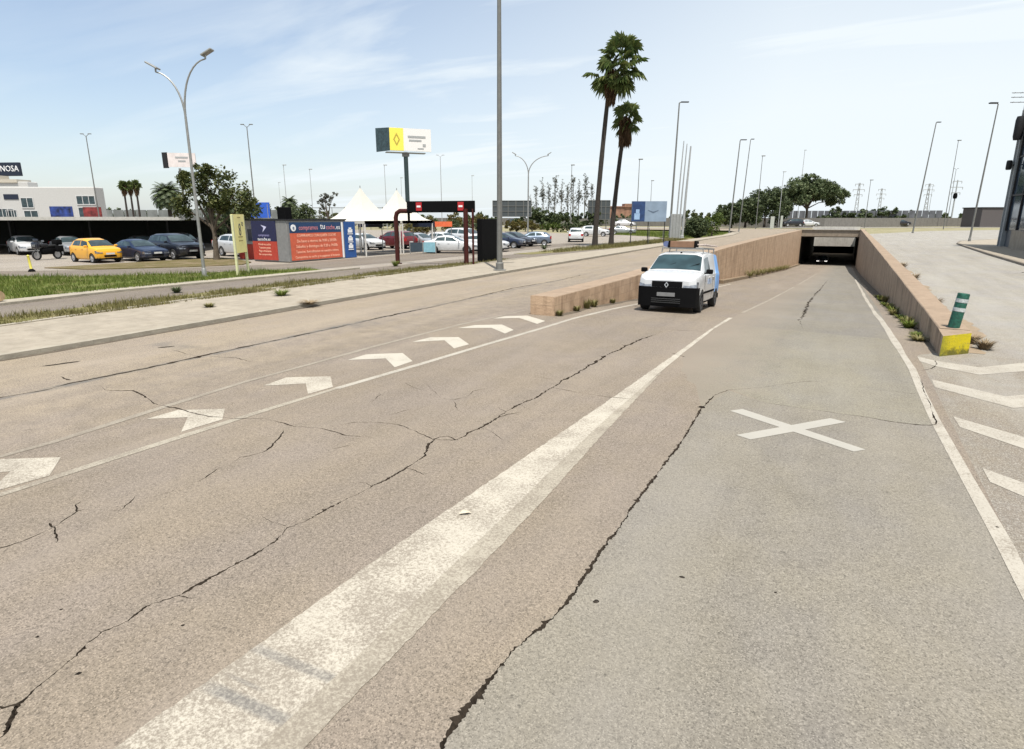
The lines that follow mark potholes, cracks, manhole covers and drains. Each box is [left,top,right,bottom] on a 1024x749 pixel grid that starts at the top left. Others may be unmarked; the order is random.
crack [0,335,652,738]
crack [798,282,826,329]
crack [440,361,937,749]
